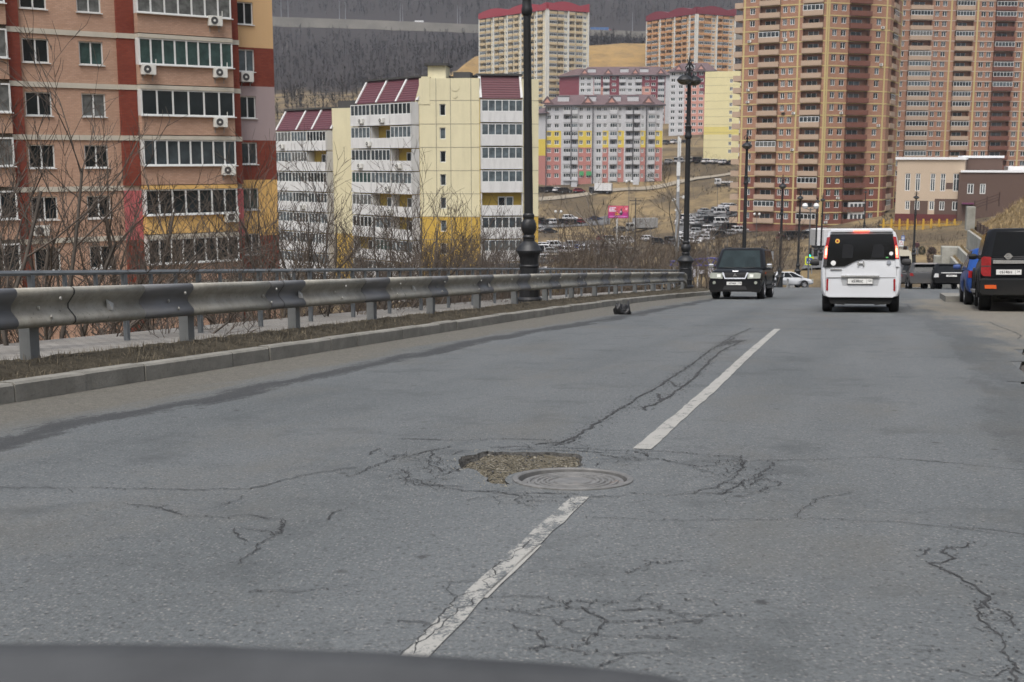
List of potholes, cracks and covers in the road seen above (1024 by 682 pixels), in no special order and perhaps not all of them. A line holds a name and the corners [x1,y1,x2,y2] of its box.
manhole cover [512,467,633,491]
pothole [442,449,604,491]
crack [483,593,746,665]
crack [11,438,1023,564]
crack [586,492,1024,682]
